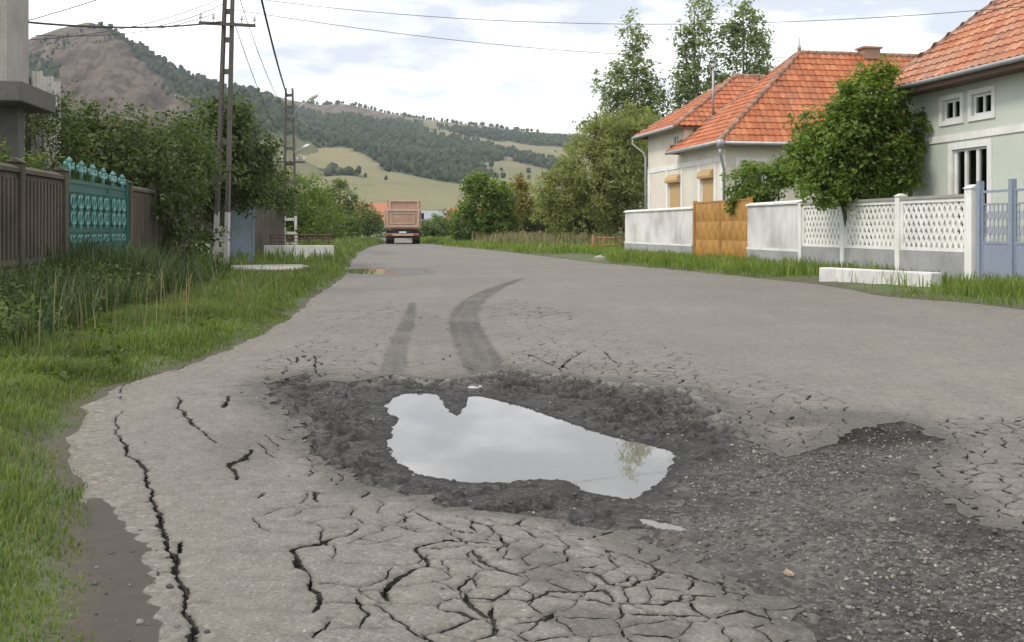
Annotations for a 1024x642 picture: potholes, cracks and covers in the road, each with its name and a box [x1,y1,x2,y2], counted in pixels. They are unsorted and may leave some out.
crack [927,417,1024,525]
pothole [637,421,1024,642]
pothole [264,367,771,531]
crack [114,306,800,642]
pothole [342,266,427,277]
